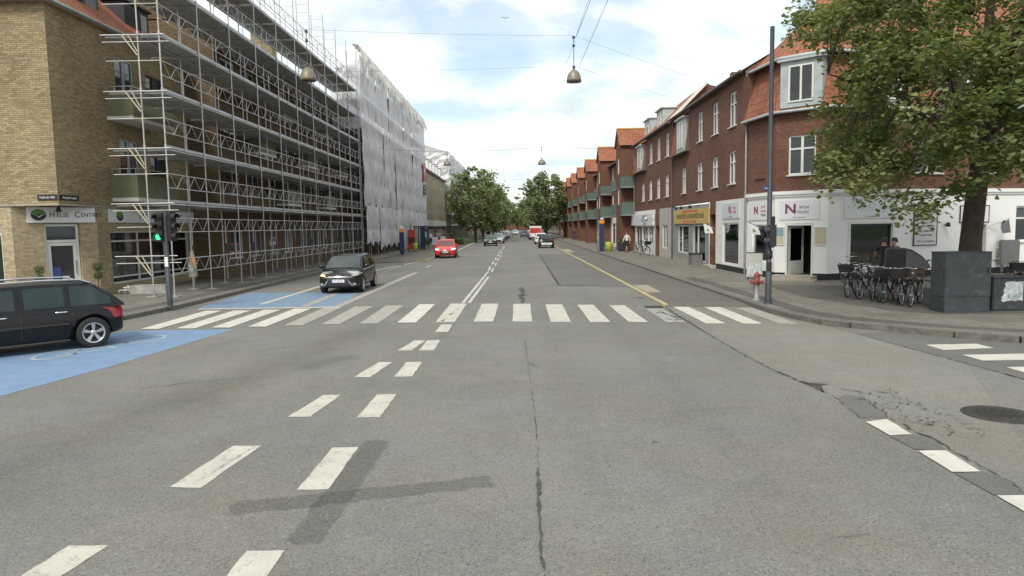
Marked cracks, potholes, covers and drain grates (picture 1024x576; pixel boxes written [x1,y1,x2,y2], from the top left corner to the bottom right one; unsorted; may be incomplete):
crack [840,387,986,436]
crack [525,342,545,576]
manhole cover [960,405,1024,424]
